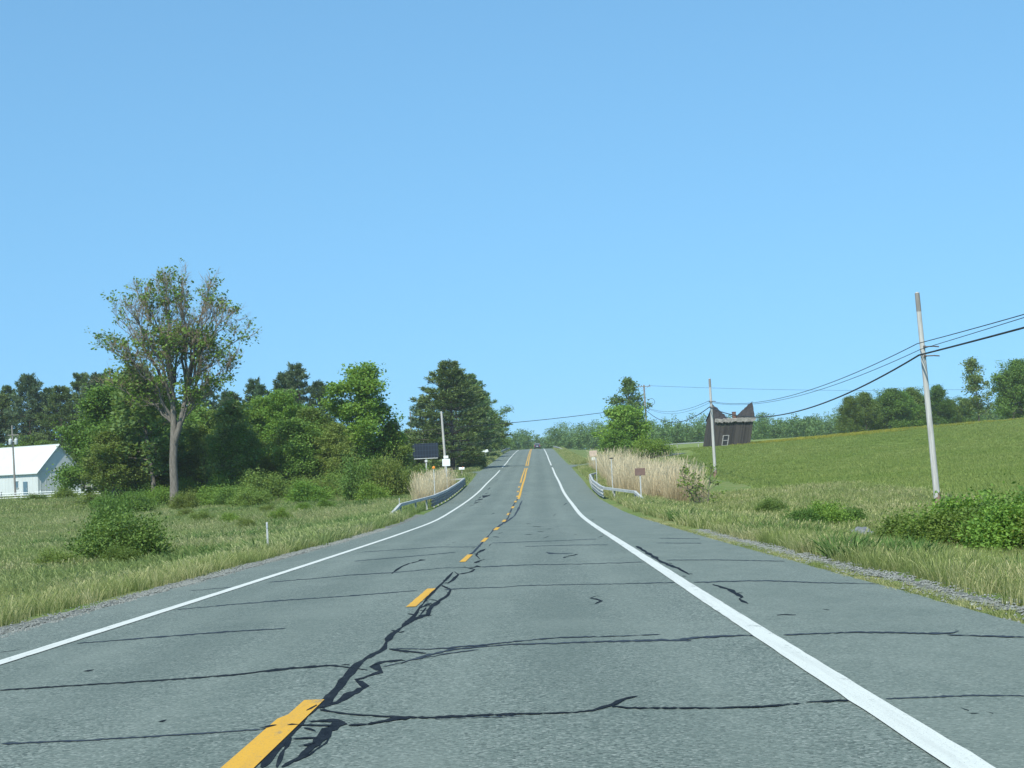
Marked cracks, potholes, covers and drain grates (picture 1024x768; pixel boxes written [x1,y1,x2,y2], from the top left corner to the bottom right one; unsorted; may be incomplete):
crack [192,503,767,591]
